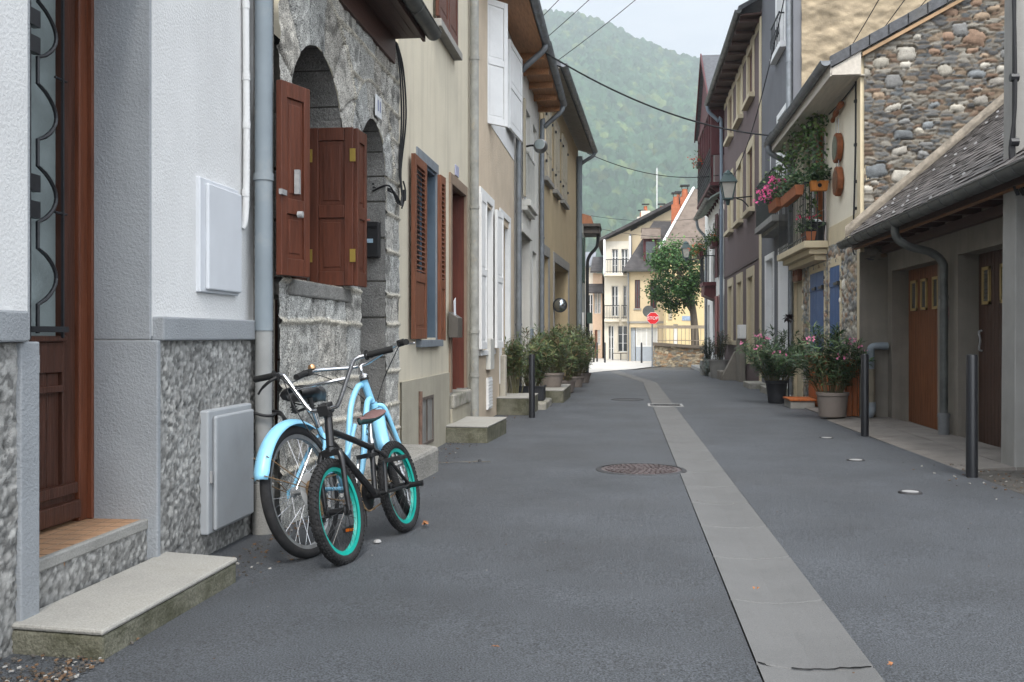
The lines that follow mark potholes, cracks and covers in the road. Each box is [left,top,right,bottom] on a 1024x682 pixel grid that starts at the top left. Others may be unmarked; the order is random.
manhole cover [596,463,687,476]
crack [757,661,872,670]
